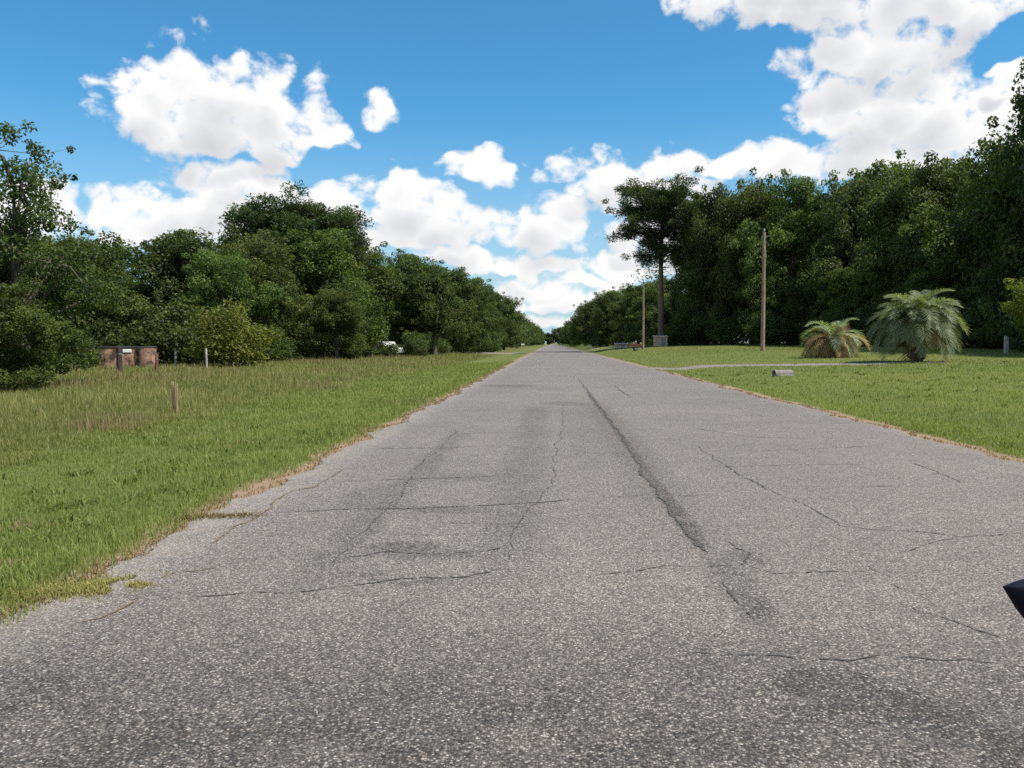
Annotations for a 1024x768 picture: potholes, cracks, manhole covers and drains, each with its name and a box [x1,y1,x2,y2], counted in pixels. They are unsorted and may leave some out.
crack [85,591,142,621]
crack [599,524,868,575]
crack [212,405,571,564]
crack [190,568,512,597]
